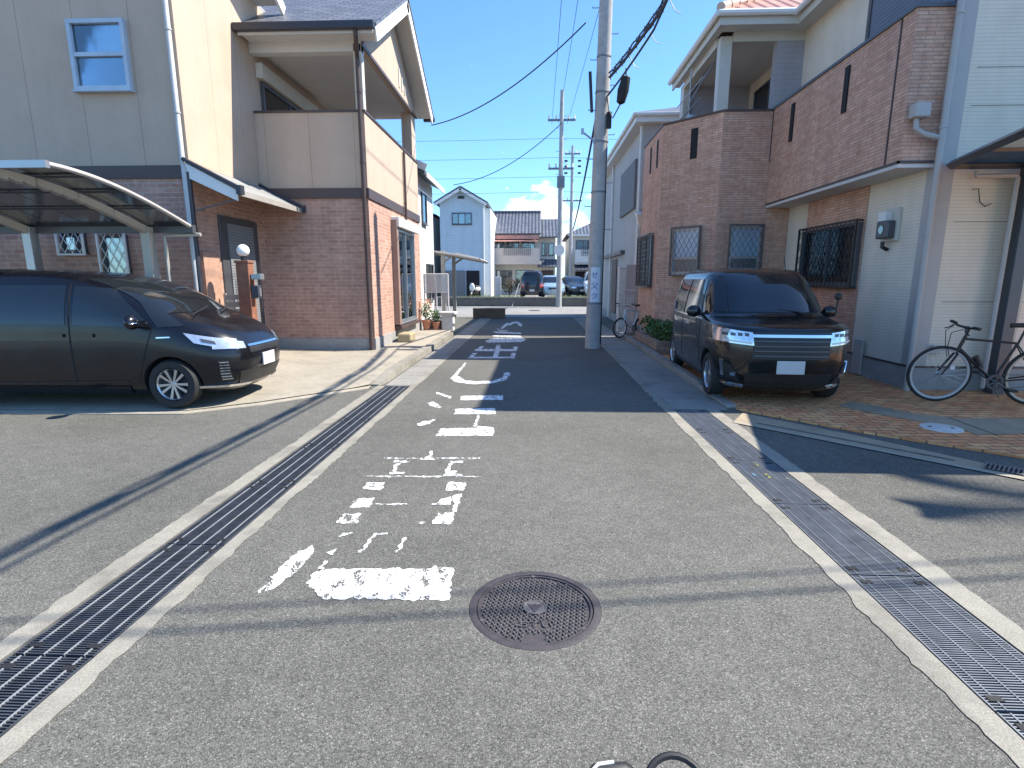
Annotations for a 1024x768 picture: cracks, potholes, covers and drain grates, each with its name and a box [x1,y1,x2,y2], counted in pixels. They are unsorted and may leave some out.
drain grate [303,420,370,447]
utility cover [919,423,964,433]
drain grate [850,575,1024,714]
drain grate [366,386,409,401]
manhole cover [469,572,601,651]
drain grate [996,712,1024,740]
drain grate [167,484,295,546]
drain grate [250,446,339,485]
drain grate [13,544,223,659]
drain grate [774,504,920,577]
drain grate [0,655,92,738]
drain grate [339,401,392,420]
